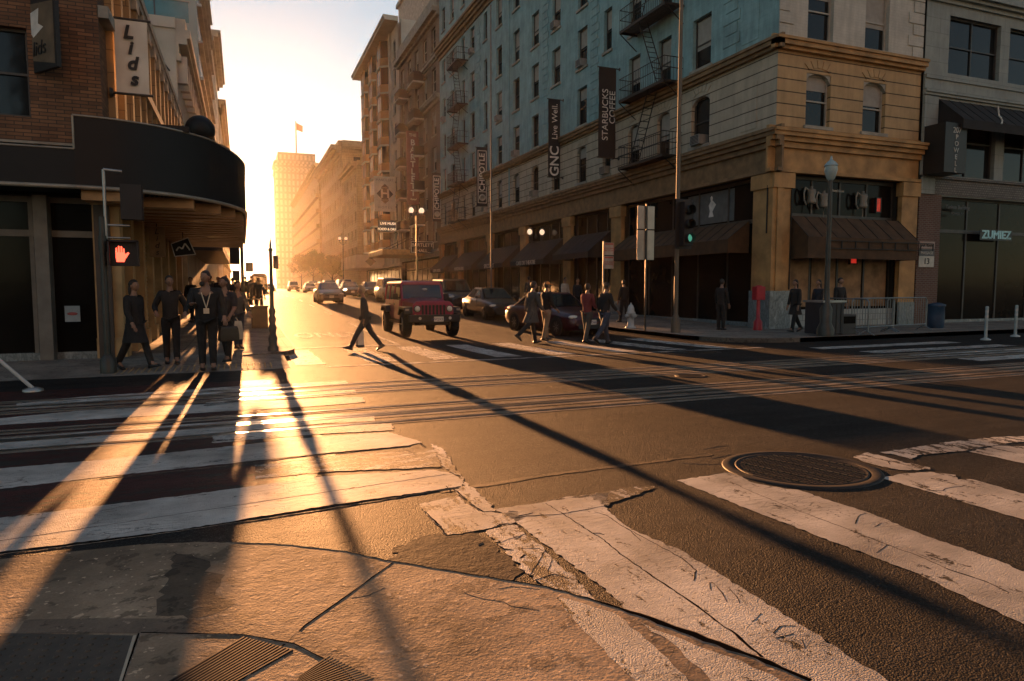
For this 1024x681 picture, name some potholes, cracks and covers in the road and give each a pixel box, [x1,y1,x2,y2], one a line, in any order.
drain grate [297,655,374,681]
drain grate [169,636,294,681]
manhole cover [722,451,885,490]
crack [0,443,812,681]
